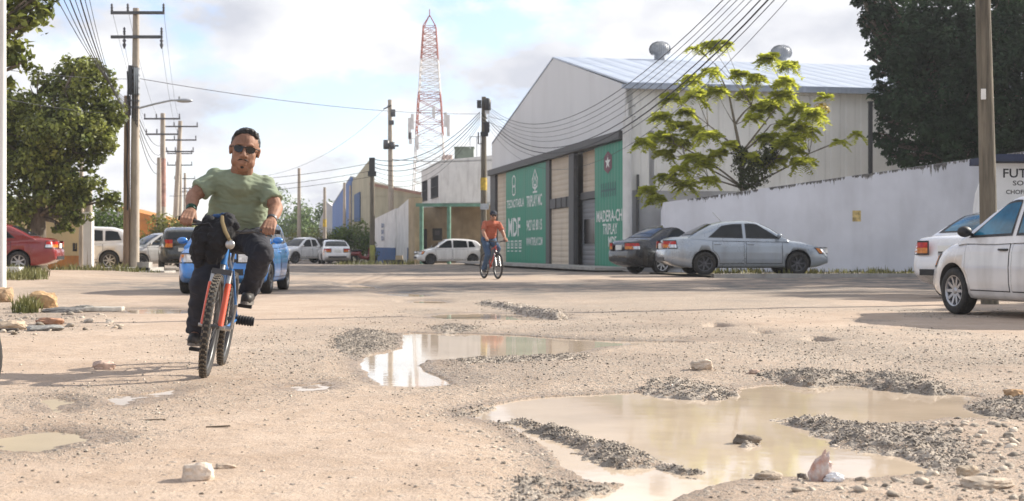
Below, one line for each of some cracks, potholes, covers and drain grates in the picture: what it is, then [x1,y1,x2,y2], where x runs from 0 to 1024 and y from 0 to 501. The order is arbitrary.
pothole [0,421,155,458]
pothole [353,367,1024,501]
pothole [311,323,730,389]
